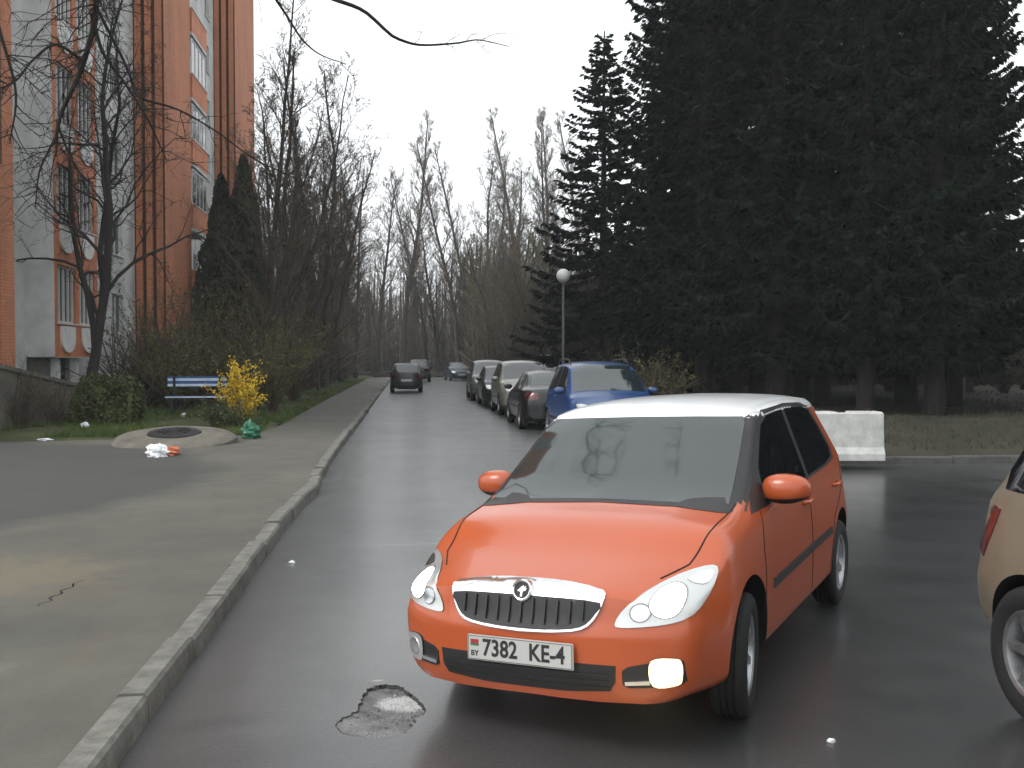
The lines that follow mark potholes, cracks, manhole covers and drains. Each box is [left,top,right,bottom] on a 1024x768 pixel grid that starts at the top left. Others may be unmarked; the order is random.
pothole [335,684,426,739]
manhole cover [111,426,238,448]
